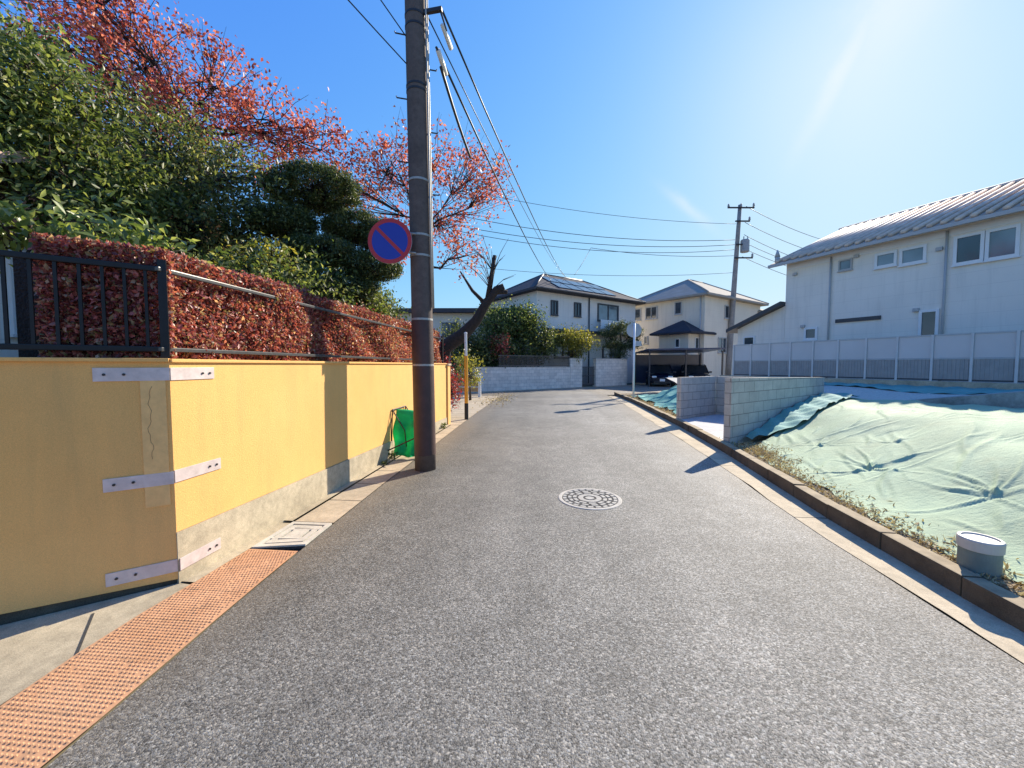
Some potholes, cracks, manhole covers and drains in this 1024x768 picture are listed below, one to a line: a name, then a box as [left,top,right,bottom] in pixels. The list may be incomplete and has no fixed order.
manhole cover [558,488,622,510]
